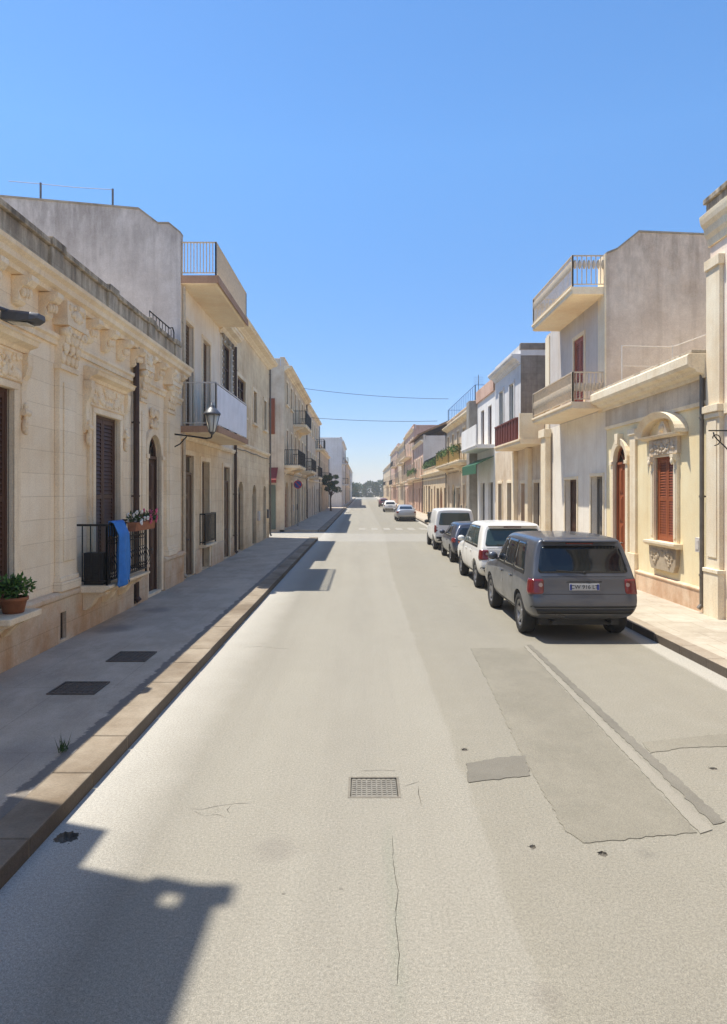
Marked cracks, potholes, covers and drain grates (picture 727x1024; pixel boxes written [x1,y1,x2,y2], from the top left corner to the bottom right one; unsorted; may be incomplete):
pothole [53,829,81,845]
manhole cover [106,651,157,662]
manhole cover [46,681,110,695]
crack [392,838,400,983]
